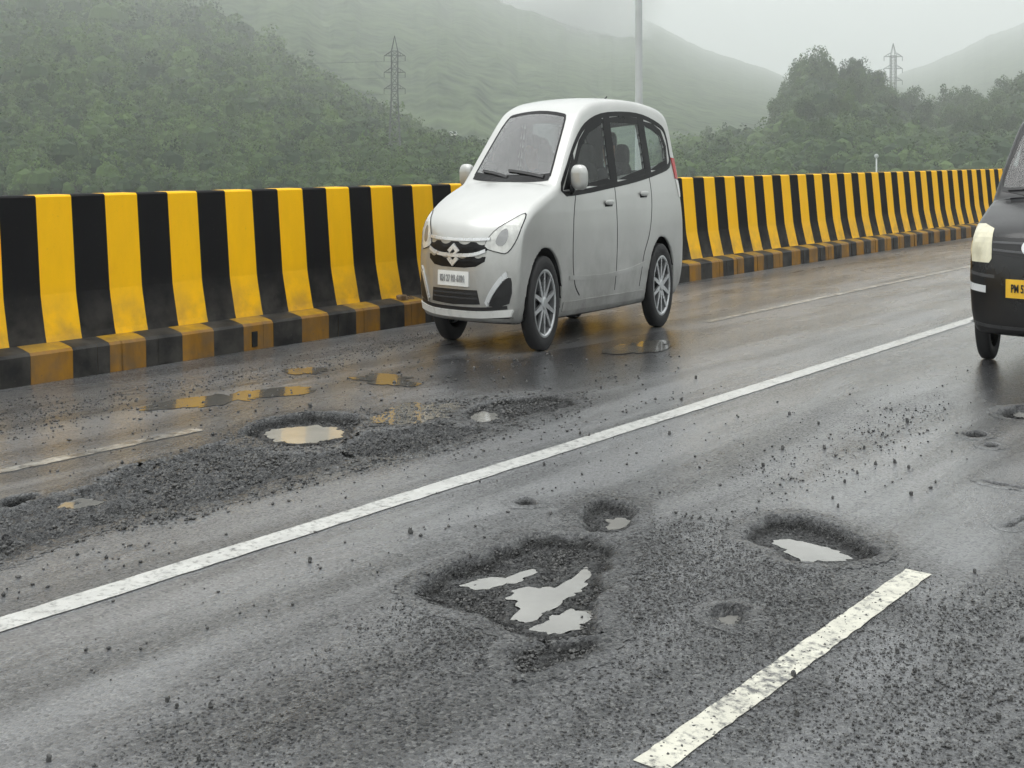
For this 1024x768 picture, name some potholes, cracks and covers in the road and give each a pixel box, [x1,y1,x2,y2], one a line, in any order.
pothole [719,508,899,571]
pothole [951,429,997,440]
pothole [391,526,645,645]
pothole [560,493,659,537]
pothole [225,408,376,450]
pothole [986,404,1024,422]
pothole [690,597,770,635]
